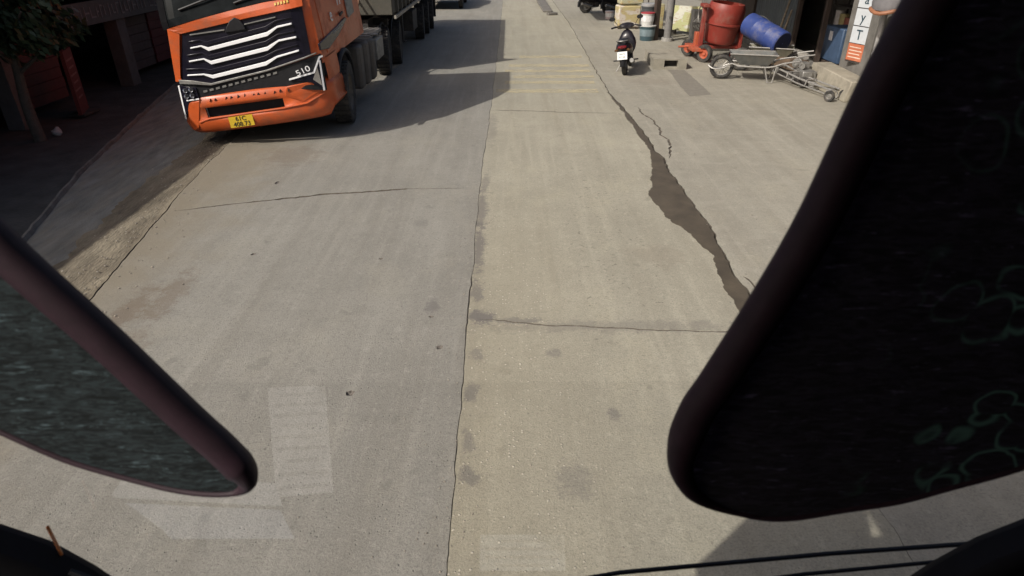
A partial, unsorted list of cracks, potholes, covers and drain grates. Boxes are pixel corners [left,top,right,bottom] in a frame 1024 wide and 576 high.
crack [446,15,727,576]
crack [552,0,918,568]
